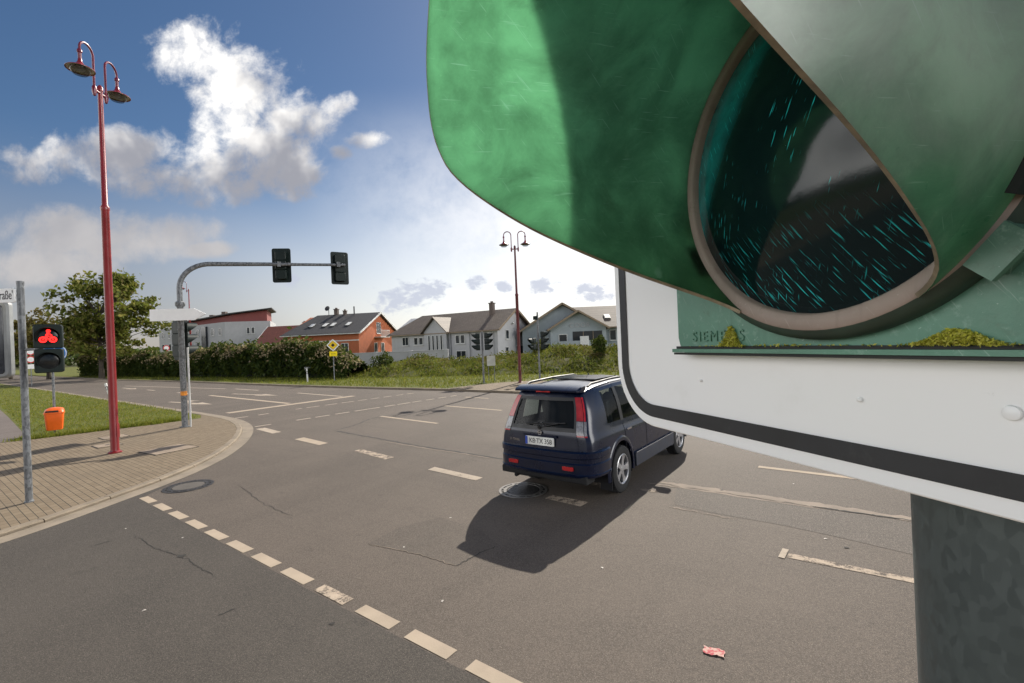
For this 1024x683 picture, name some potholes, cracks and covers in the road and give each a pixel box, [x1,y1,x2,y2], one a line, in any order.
manhole cover [162,479,214,493]
manhole cover [499,482,548,498]
